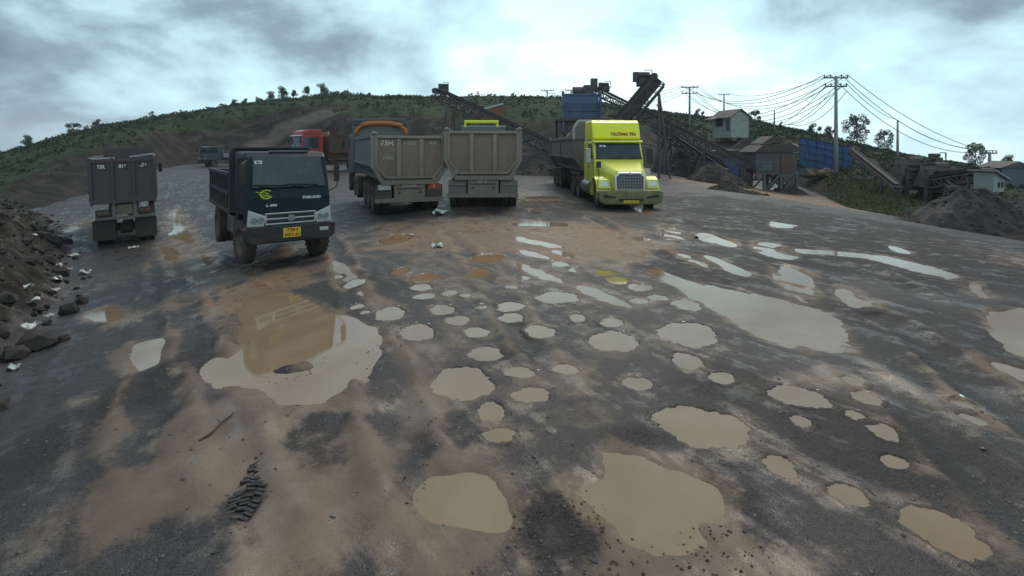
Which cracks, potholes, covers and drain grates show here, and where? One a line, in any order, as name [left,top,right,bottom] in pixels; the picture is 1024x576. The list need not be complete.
pothole [887,498,1006,569]
pothole [817,478,879,511]
pothole [424,363,500,403]
pothole [583,328,643,353]
pothole [471,398,512,425]
pothole [395,322,438,342]
pothole [752,450,805,483]
pothole [651,321,723,350]
pothole [760,382,840,411]
pothole [644,402,760,452]
pothole [666,298,706,312]
